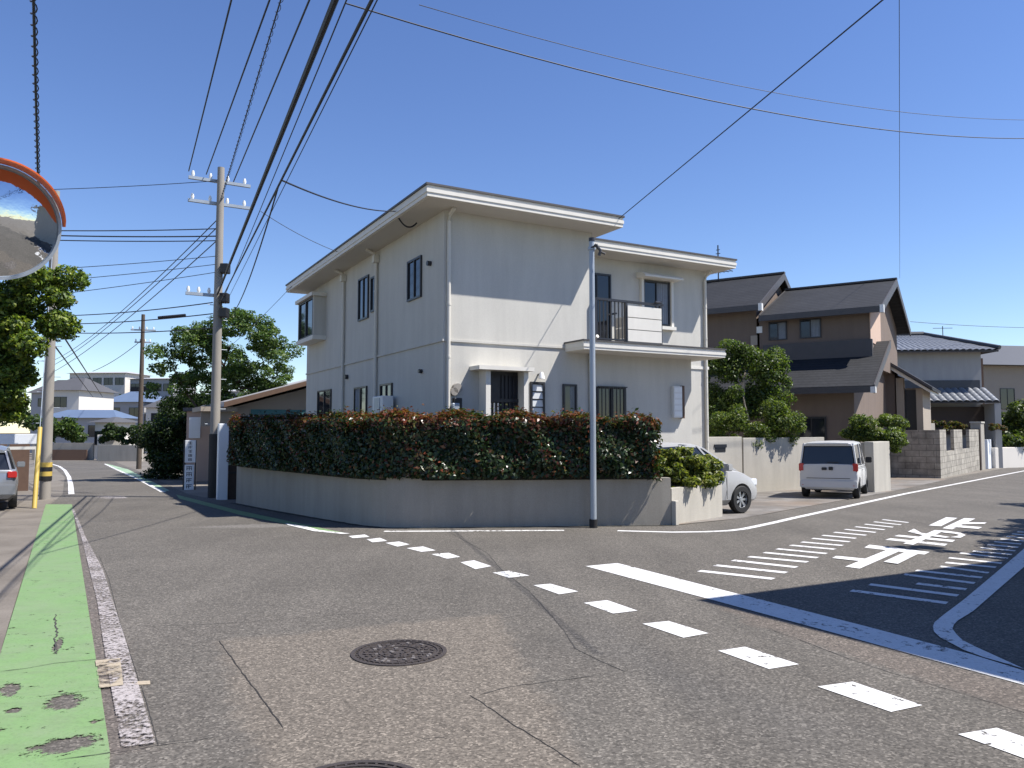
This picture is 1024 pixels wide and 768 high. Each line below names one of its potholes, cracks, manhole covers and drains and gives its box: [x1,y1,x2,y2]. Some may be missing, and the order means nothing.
crack [470,676,588,766]
manhole cover [316,760,414,768]
crack [4,614,113,671]
crack [58,641,283,760]
crack [444,529,623,671]
manhole cover [350,639,447,667]
